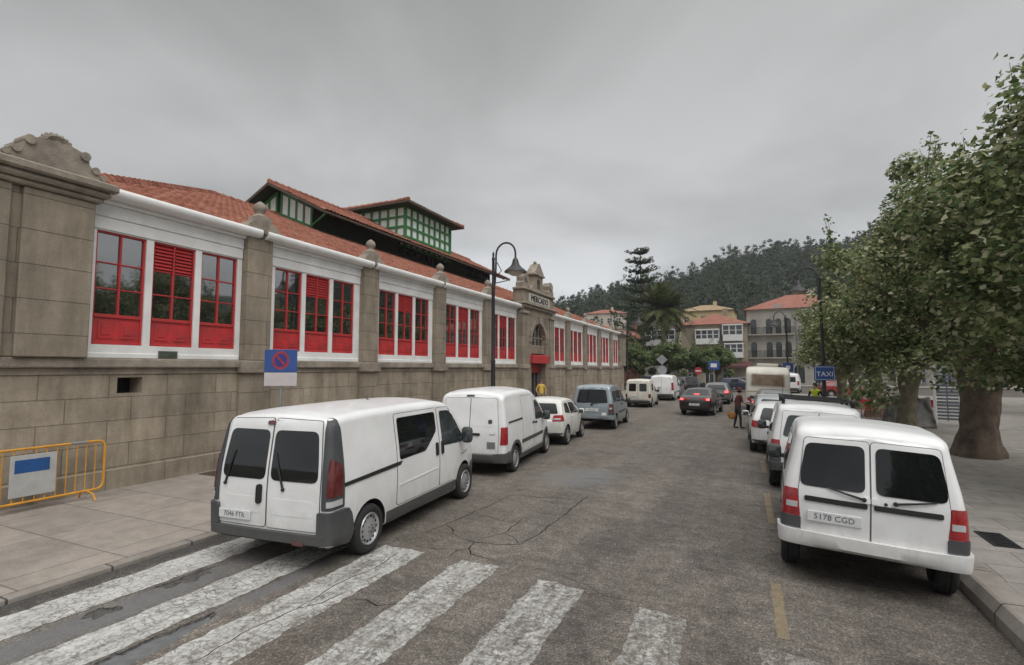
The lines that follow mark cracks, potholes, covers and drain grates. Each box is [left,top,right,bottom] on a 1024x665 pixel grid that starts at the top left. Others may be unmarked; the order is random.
drain grate [973,531,1024,550]
crack [416,495,588,560]
pothole [93,612,216,665]
pothole [81,606,123,620]
